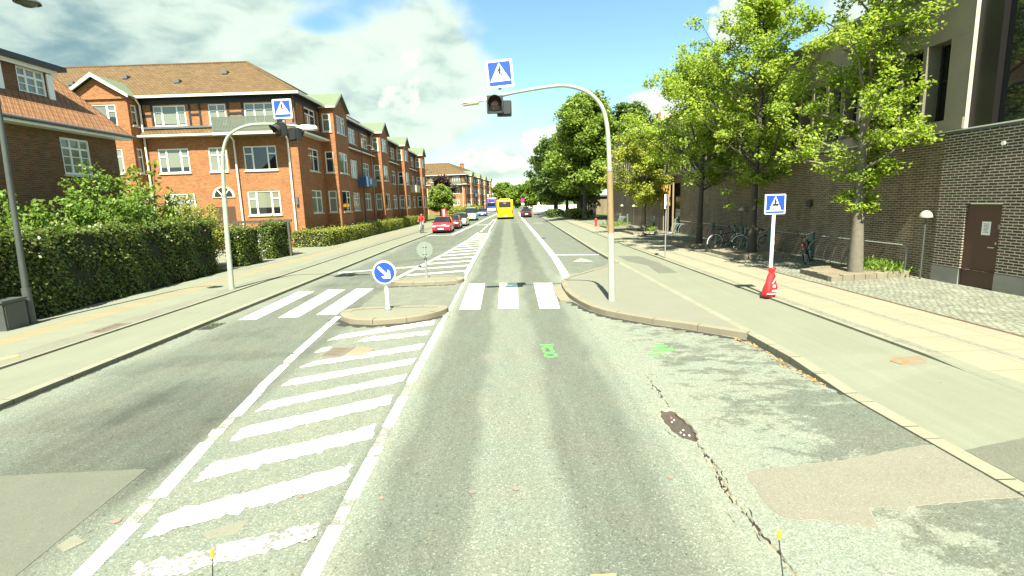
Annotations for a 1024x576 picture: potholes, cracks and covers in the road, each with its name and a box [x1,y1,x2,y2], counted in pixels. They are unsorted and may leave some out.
drain grate [197,321,225,330]
manhole cover [317,346,375,357]
crack [643,373,677,439]
crack [697,442,801,576]
pothole [657,407,700,444]
